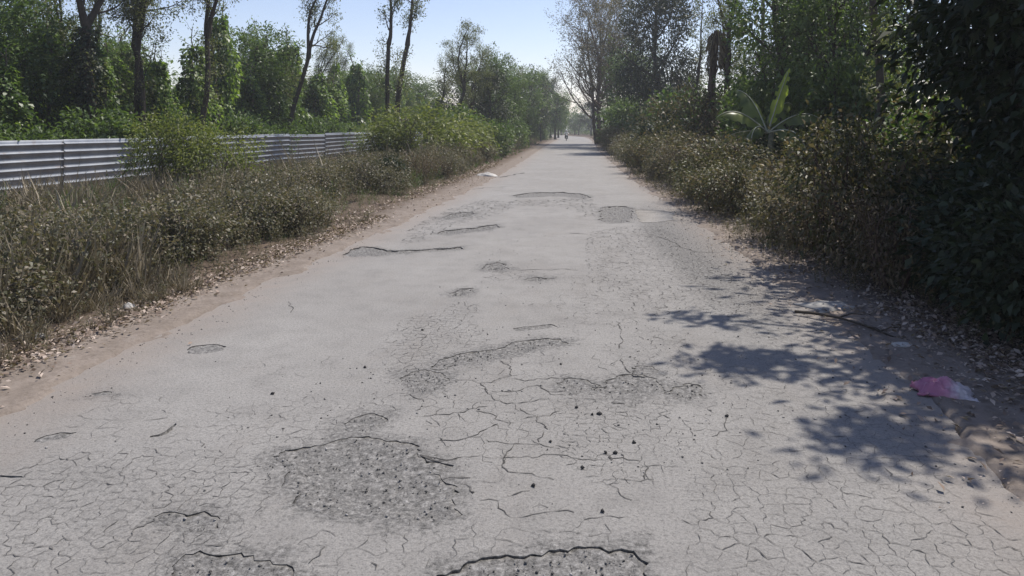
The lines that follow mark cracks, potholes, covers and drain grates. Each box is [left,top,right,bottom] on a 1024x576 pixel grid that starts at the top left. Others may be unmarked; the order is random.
crack [244,301,497,375]
pothole [344,413,388,432]
crack [50,394,176,437]
pothole [632,366,659,378]
pothole [598,206,633,223]
pothole [482,262,509,271]
pothole [171,550,295,576]
pothole [431,338,569,370]
pothole [436,546,649,576]
pothole [438,224,499,235]
crack [167,351,791,576]
pothole [449,288,474,296]
